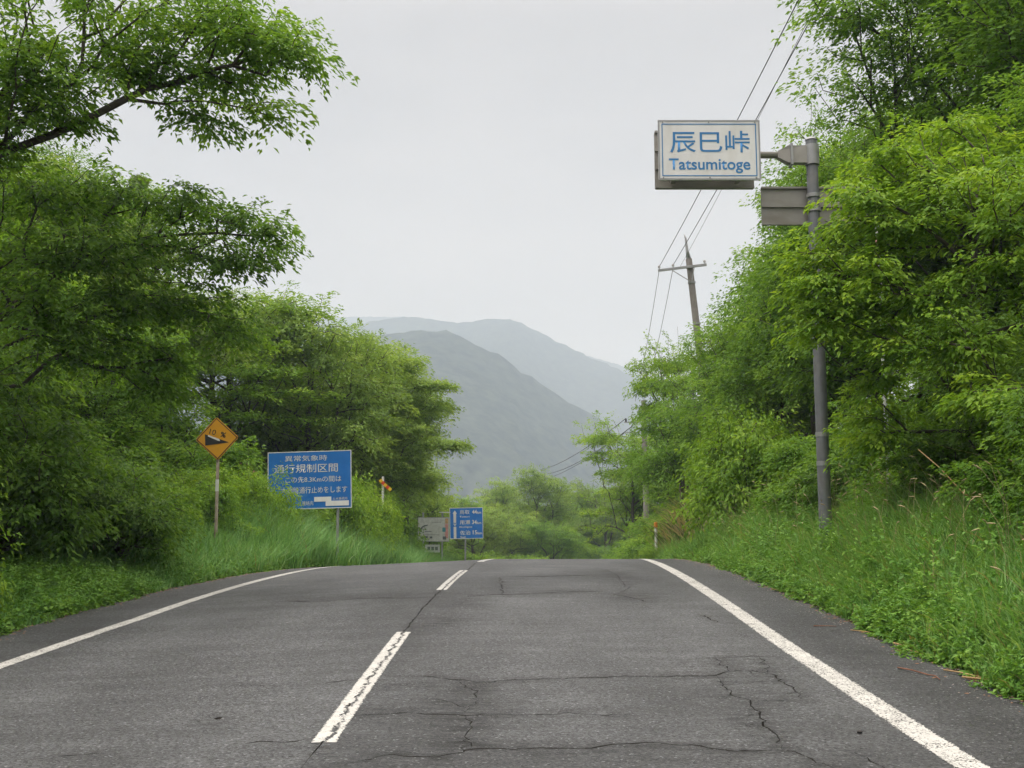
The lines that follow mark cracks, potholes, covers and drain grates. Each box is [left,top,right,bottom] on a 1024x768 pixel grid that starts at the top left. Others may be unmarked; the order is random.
crack [344,656,844,768]
crack [468,575,574,597]
